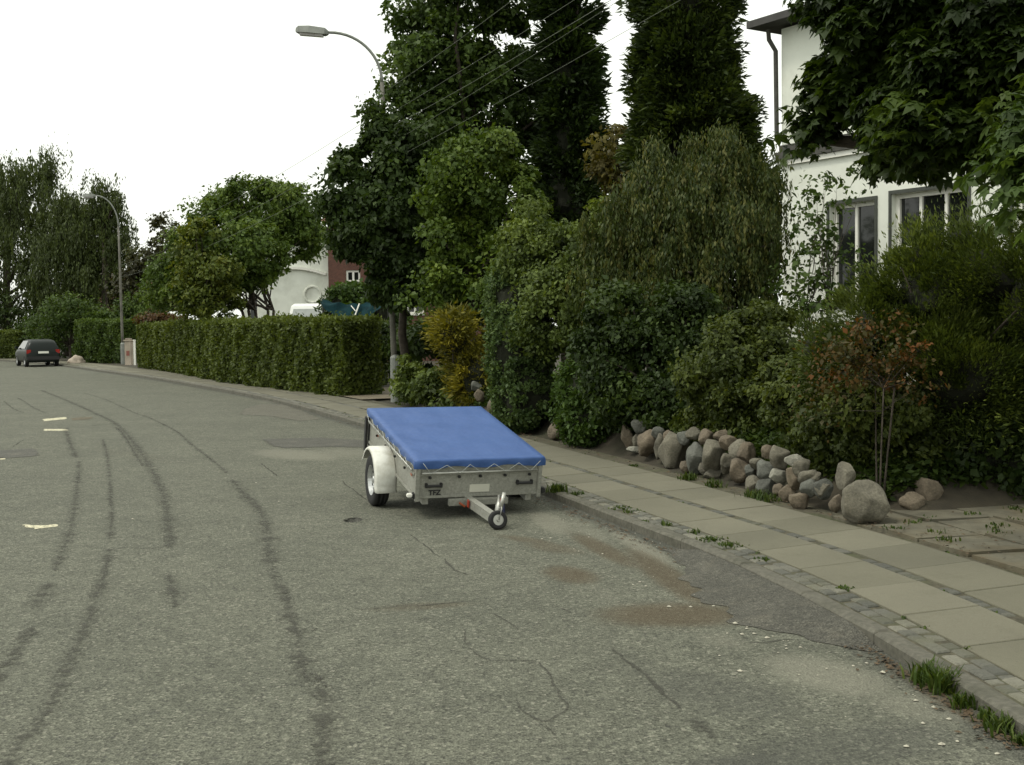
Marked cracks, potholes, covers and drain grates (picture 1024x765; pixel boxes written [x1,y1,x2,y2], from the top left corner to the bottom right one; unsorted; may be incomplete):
crack [613,649,717,740]
crack [464,630,569,734]
